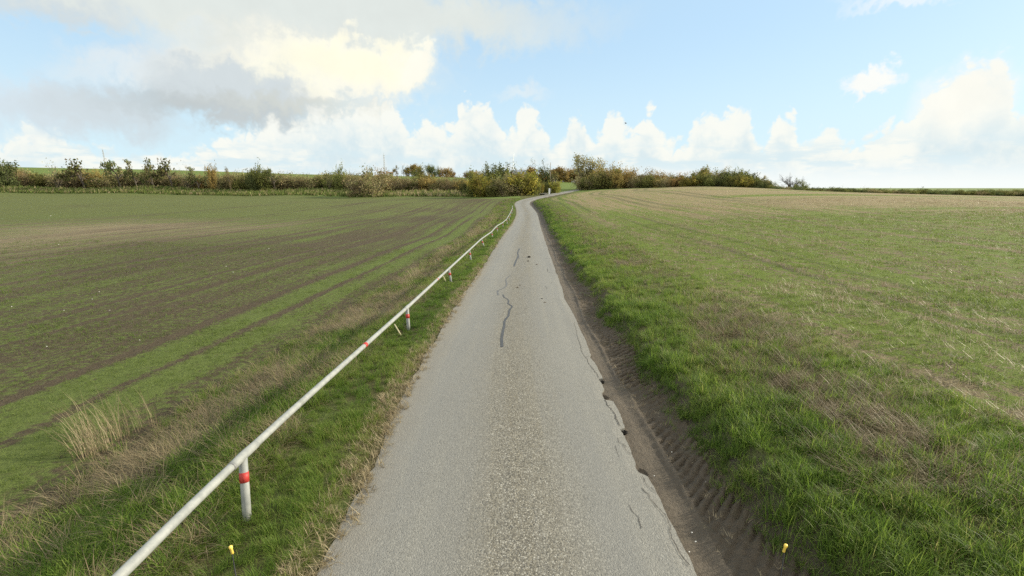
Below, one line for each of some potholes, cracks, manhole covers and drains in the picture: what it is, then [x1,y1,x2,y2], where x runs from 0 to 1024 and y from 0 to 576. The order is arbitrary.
crack [630,476,690,565]
